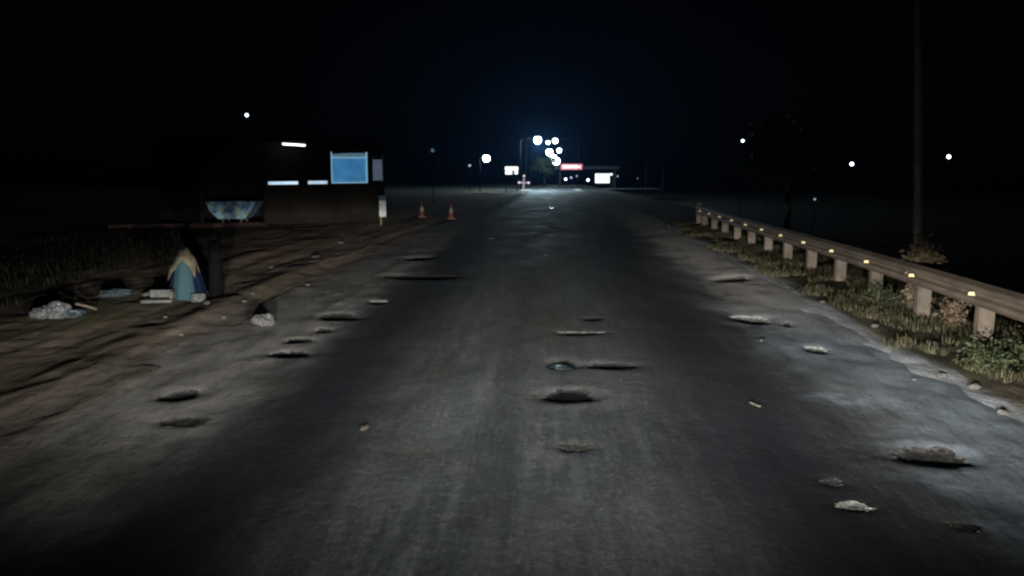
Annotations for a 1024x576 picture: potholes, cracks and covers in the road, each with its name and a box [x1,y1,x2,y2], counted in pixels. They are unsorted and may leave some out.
pothole [542,389,595,403]
pothole [941,521,983,533]
pothole [888,446,973,467]
pothole [318,313,362,321]
pothole [546,360,576,370]
pothole [154,389,200,401]
pothole [158,416,212,427]
